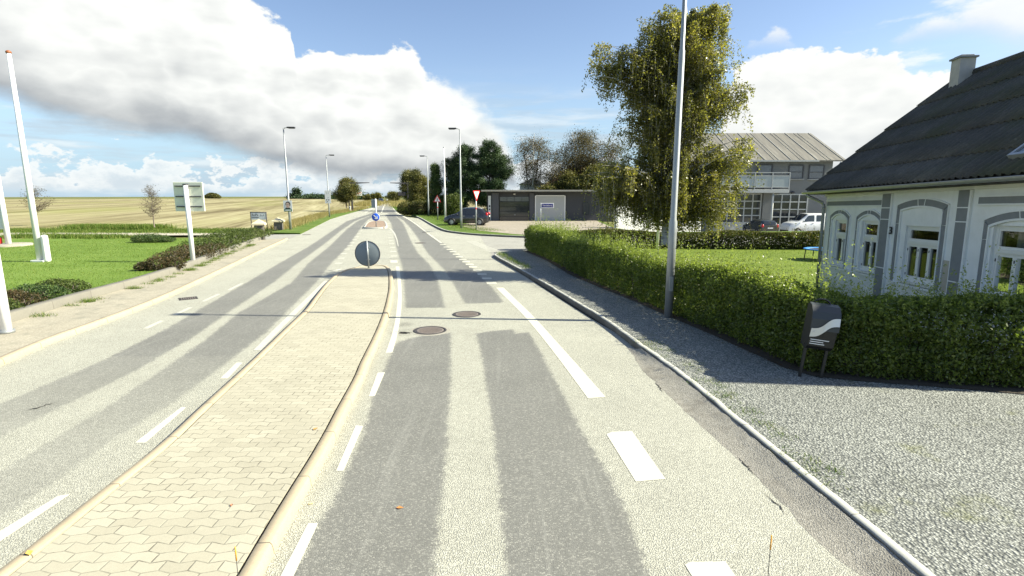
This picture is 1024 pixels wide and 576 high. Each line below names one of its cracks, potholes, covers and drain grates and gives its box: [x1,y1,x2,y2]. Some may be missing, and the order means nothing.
manhole cover [411,326,450,336]
